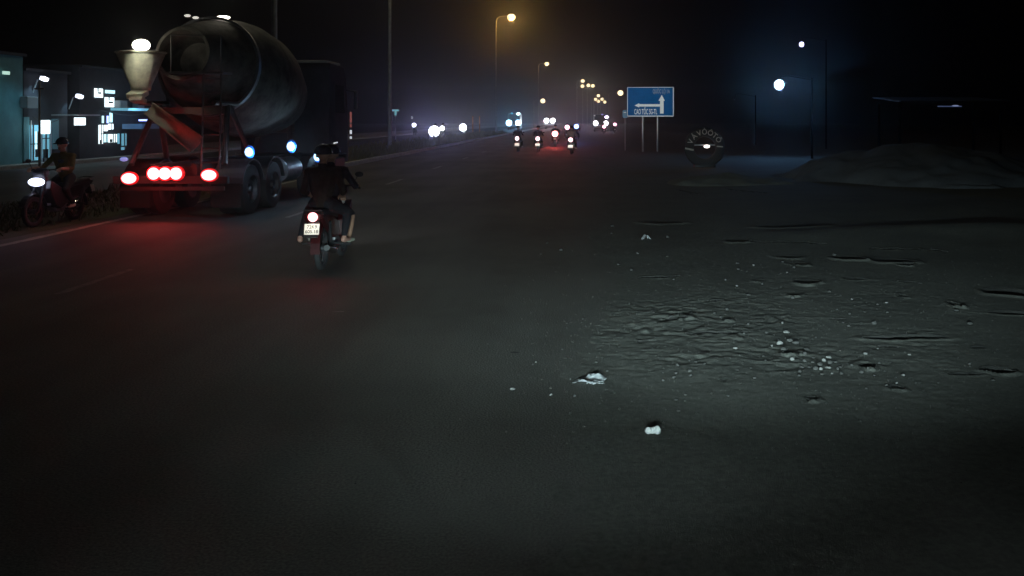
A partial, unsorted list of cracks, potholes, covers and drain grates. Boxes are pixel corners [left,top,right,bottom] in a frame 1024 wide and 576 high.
pothole [982,286,1024,296]
pothole [980,365,1014,373]
crack [667,299,765,335]
